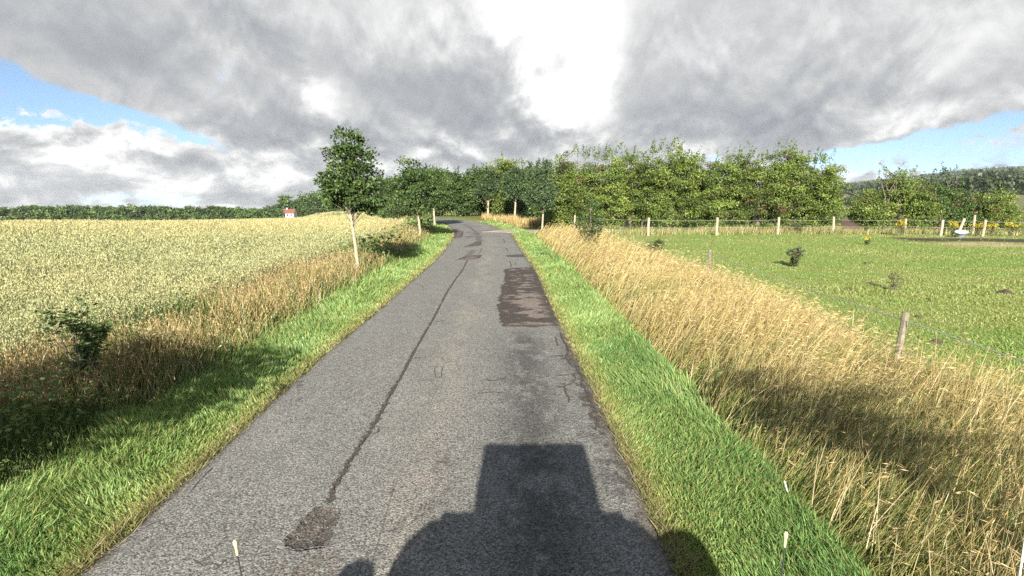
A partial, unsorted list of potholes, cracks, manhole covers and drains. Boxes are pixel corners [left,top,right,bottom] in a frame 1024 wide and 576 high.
crack [555,332,607,435]
crack [326,225,516,503]
